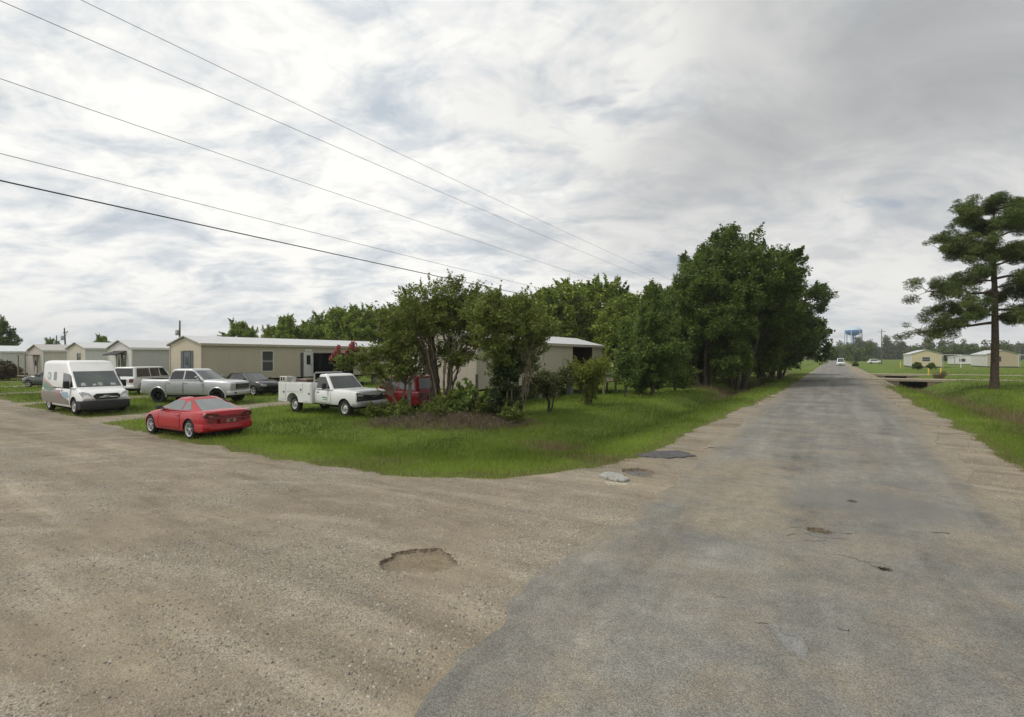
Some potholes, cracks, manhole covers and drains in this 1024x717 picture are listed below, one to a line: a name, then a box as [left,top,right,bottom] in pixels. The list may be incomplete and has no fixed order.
pothole [375,546,462,575]
pothole [620,467,656,478]
pothole [805,527,835,535]
crack [787,527,900,571]
